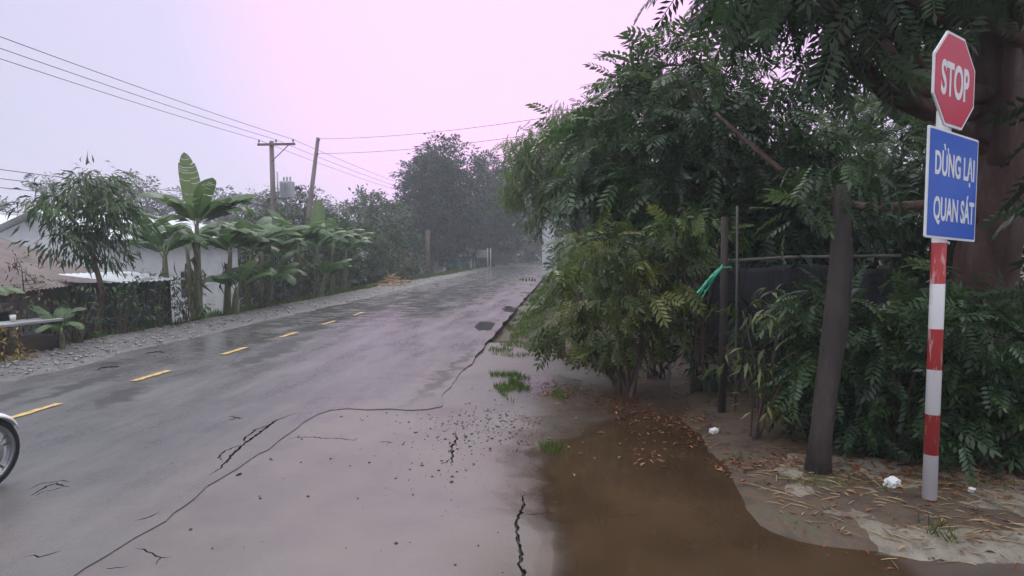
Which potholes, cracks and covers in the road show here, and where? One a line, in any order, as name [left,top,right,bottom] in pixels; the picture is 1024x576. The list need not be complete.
crack [442,432,458,466]
crack [106,548,168,569]
crack [208,415,289,476]
crack [514,493,543,576]
pothole [475,322,495,331]
